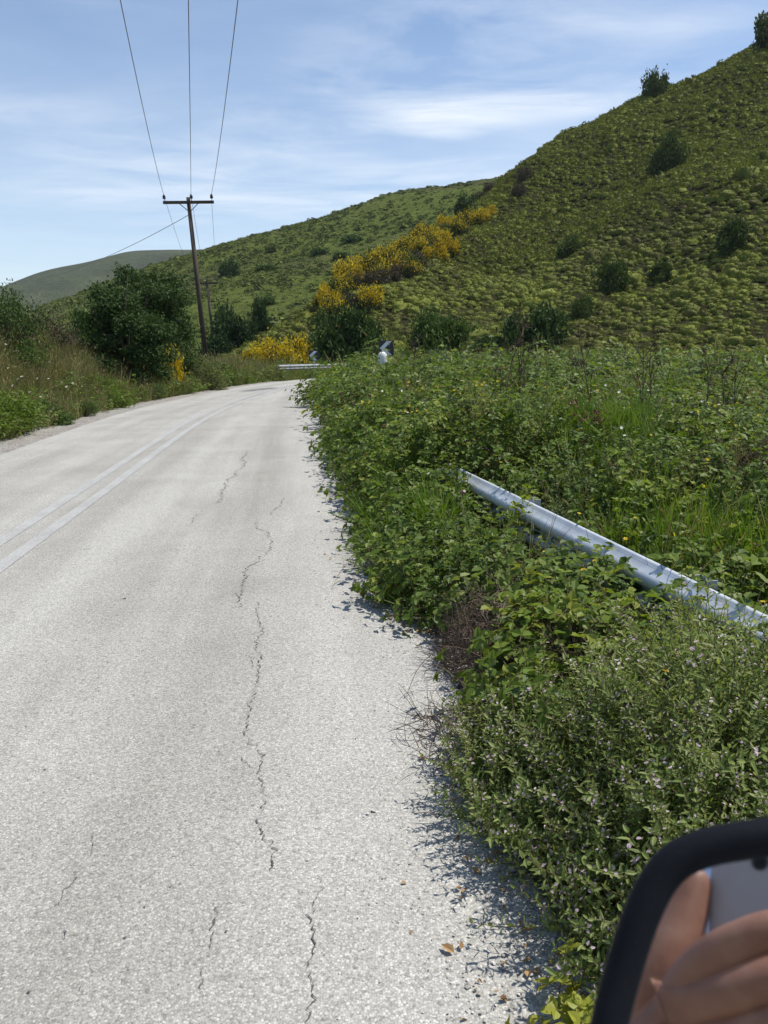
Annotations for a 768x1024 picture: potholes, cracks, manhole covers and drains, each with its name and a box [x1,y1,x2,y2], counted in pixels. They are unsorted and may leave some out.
crack [235,499,282,873]
crack [305,886,324,1024]
